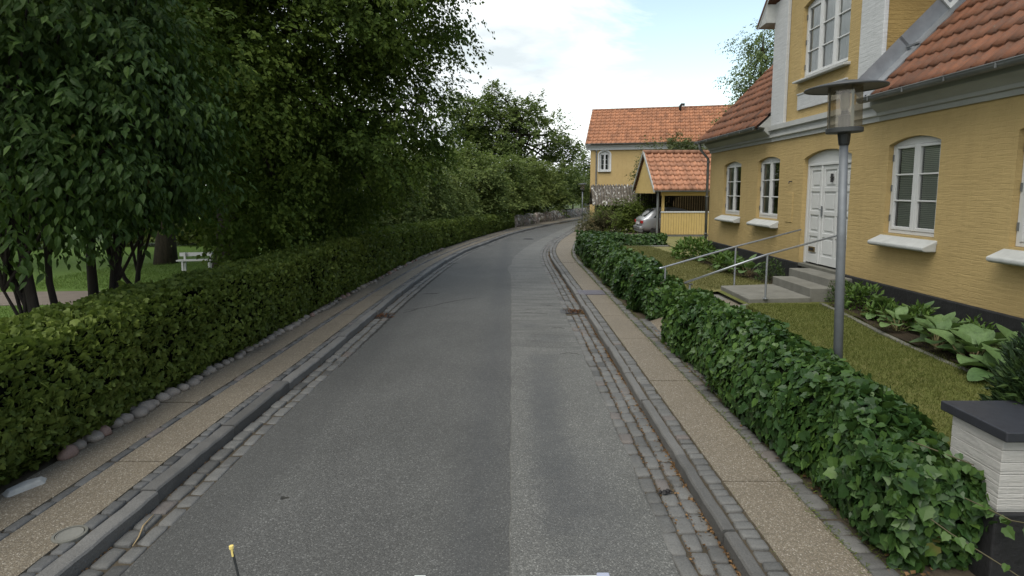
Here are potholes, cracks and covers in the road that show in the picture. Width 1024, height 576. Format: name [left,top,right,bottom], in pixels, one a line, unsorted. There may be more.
manhole cover [50,525,89,546]
